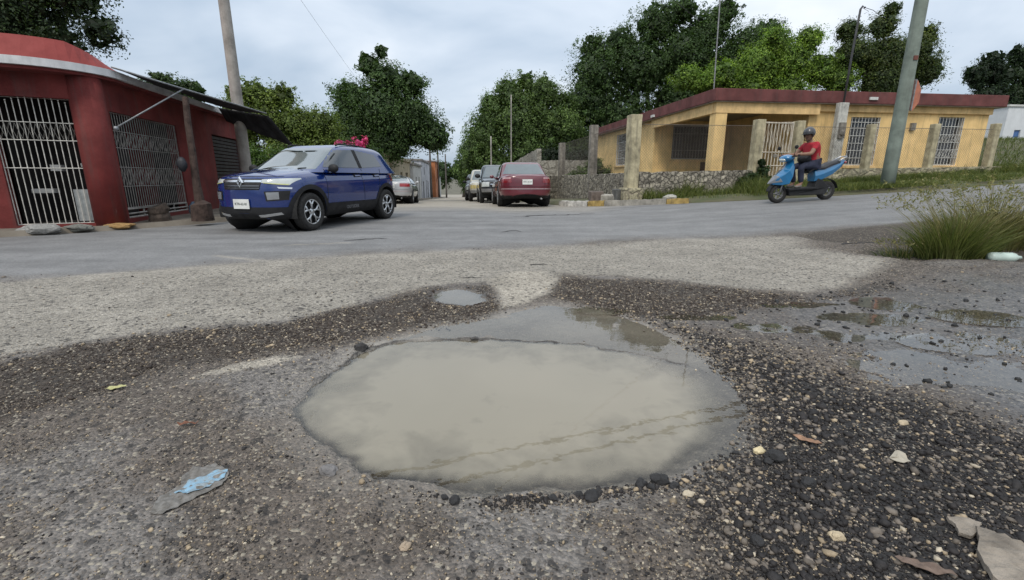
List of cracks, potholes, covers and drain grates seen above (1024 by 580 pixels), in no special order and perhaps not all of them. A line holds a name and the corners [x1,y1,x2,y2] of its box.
pothole [280,337,756,502]
pothole [428,287,490,306]
